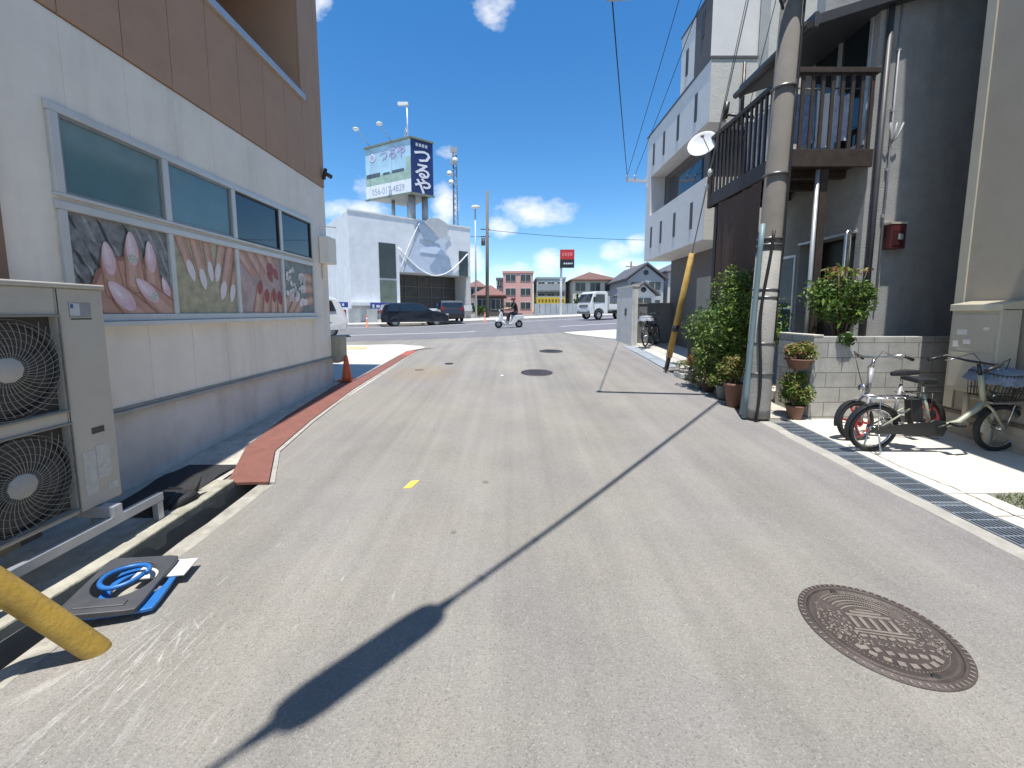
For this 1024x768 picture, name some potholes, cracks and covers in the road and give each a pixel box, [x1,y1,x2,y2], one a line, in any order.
drain grate [934,504,1024,549]
manhole cover [798,584,978,692]
drain grate [773,422,857,454]
drain grate [835,454,963,504]
